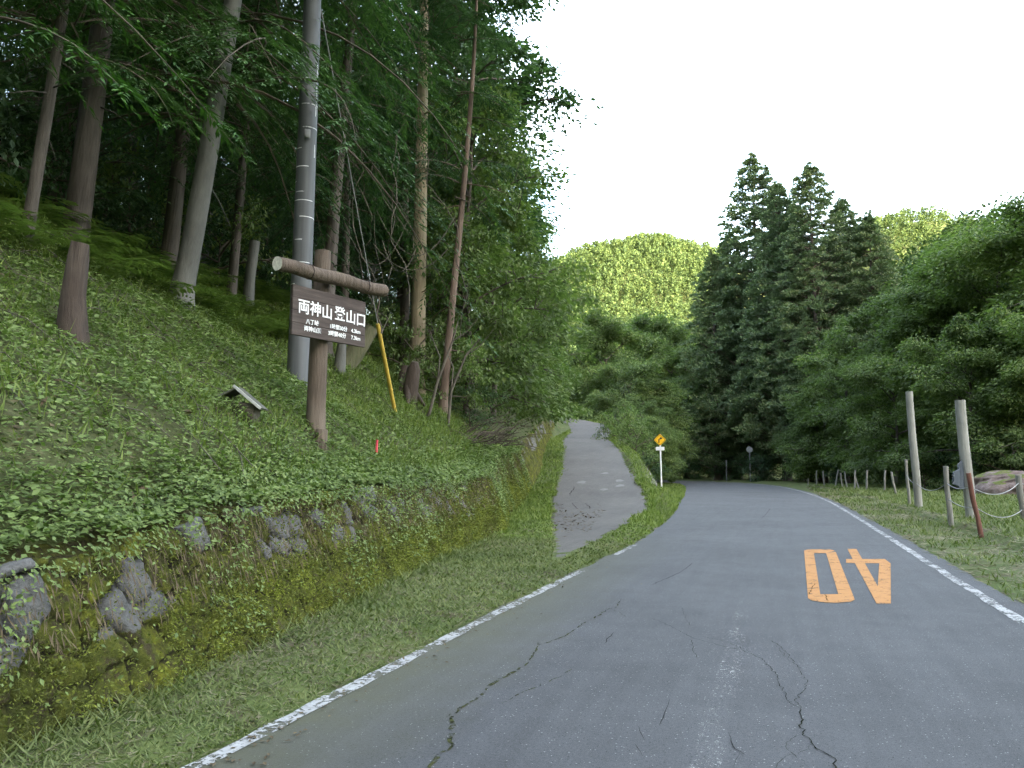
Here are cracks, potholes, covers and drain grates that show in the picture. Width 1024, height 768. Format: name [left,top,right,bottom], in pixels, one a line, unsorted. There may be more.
crack [669,609,837,768]
crack [427,599,621,768]
